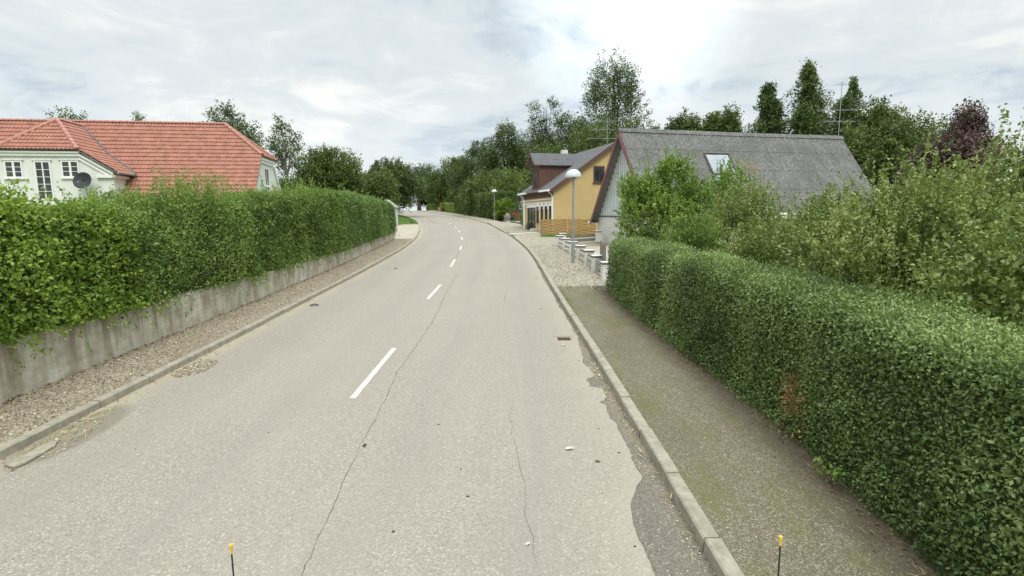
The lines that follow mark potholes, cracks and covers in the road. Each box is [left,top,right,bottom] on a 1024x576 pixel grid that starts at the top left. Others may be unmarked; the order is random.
crack [510,406,539,567]
crack [301,276,456,576]
